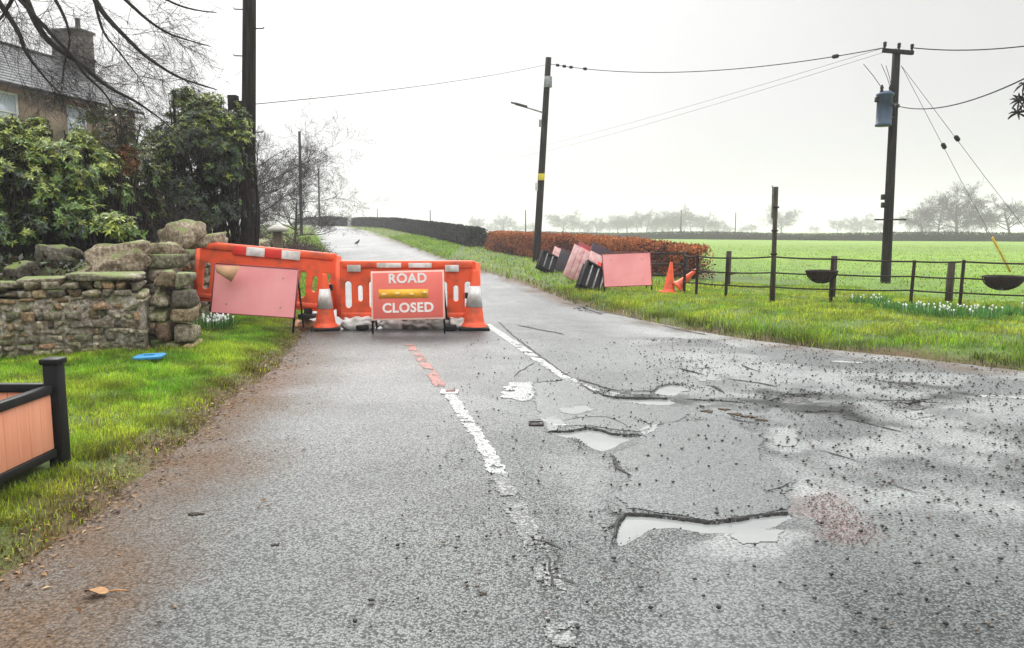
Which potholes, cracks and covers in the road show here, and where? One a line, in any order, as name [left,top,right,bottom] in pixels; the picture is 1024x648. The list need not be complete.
crack [529,535,585,589]
pothole [549,427,639,451]
pothole [611,511,793,546]
crack [610,453,631,475]
crack [499,322,620,395]
crack [680,365,776,422]
pothole [652,383,696,396]
